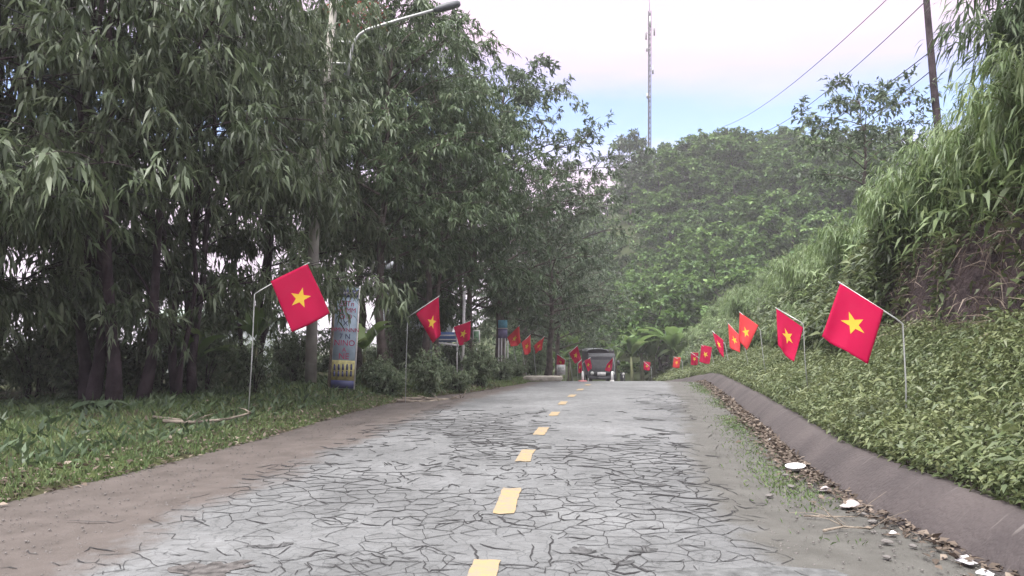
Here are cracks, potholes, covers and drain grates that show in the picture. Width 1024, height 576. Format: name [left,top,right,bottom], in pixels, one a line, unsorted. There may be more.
crack [93,390,808,576]
